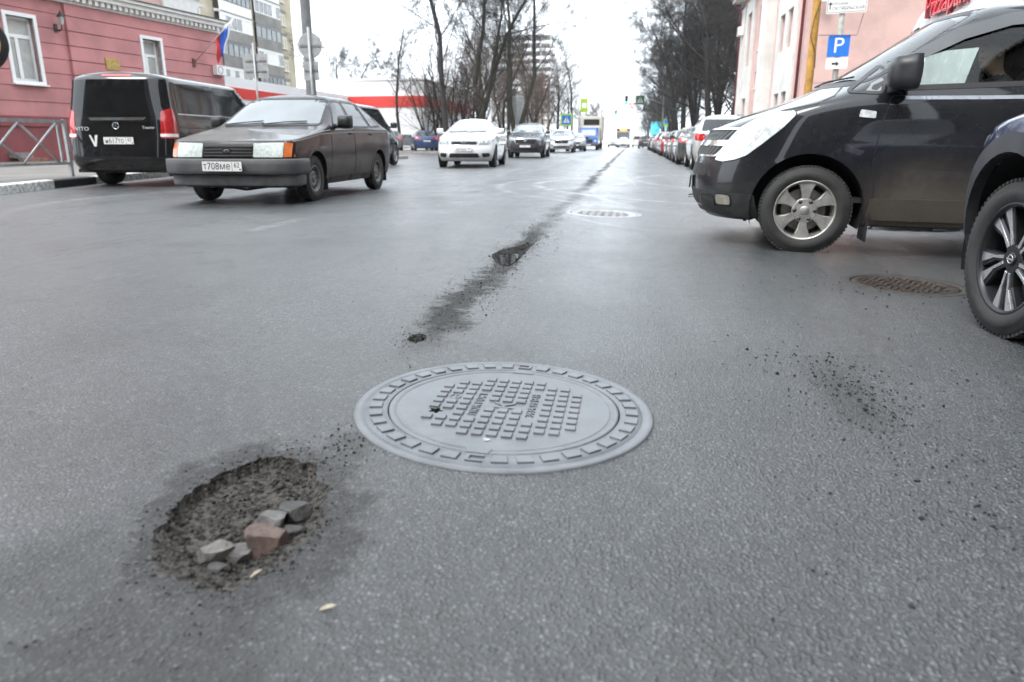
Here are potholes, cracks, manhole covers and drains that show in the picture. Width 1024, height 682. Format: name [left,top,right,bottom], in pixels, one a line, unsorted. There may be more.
manhole cover [354,362,654,474]
pothole [407,334,427,343]
pothole [489,242,534,266]
pothole [146,451,332,597]
manhole cover [841,273,967,297]
